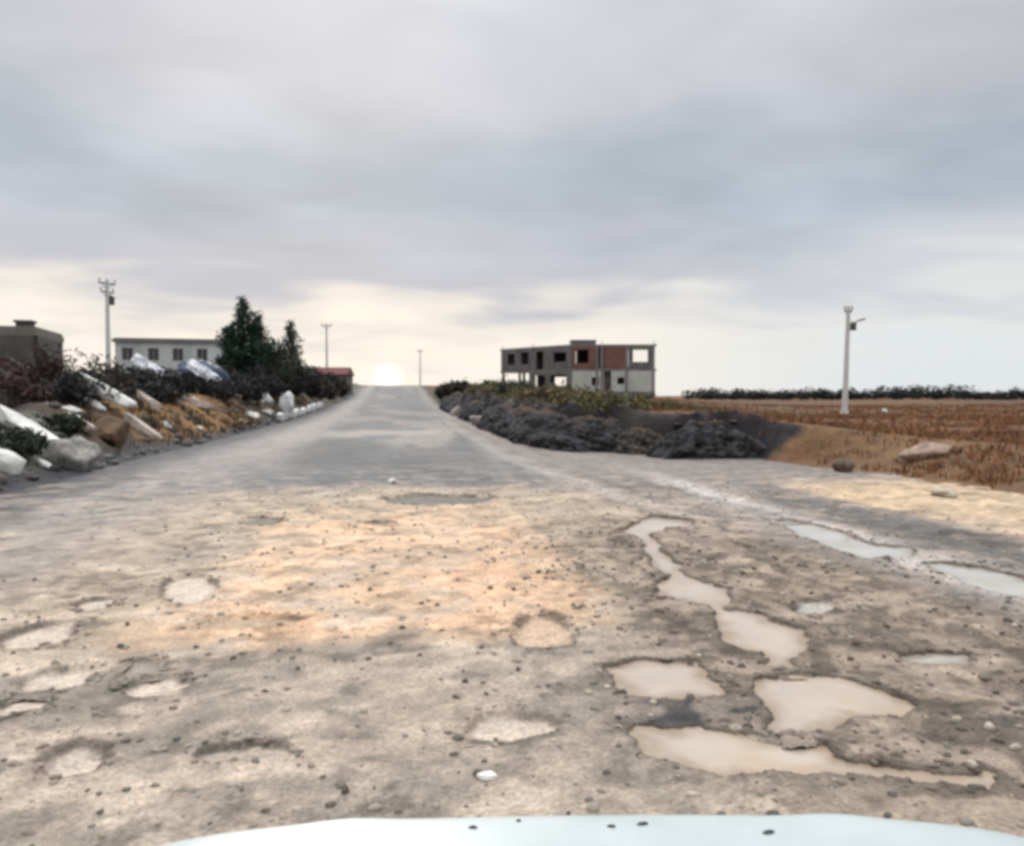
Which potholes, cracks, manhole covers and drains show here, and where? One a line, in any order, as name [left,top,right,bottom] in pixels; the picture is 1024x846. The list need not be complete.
pothole [443,703,578,747]
pothole [144,571,232,607]
pothole [778,593,850,617]
pothole [497,610,588,650]
pothole [584,654,738,704]
pothole [744,668,932,749]
pothole [617,720,1017,796]
pothole [9,732,131,785]
pothole [0,659,134,704]
pothole [0,614,95,652]
pothole [0,687,69,722]
pothole [376,492,504,506]
